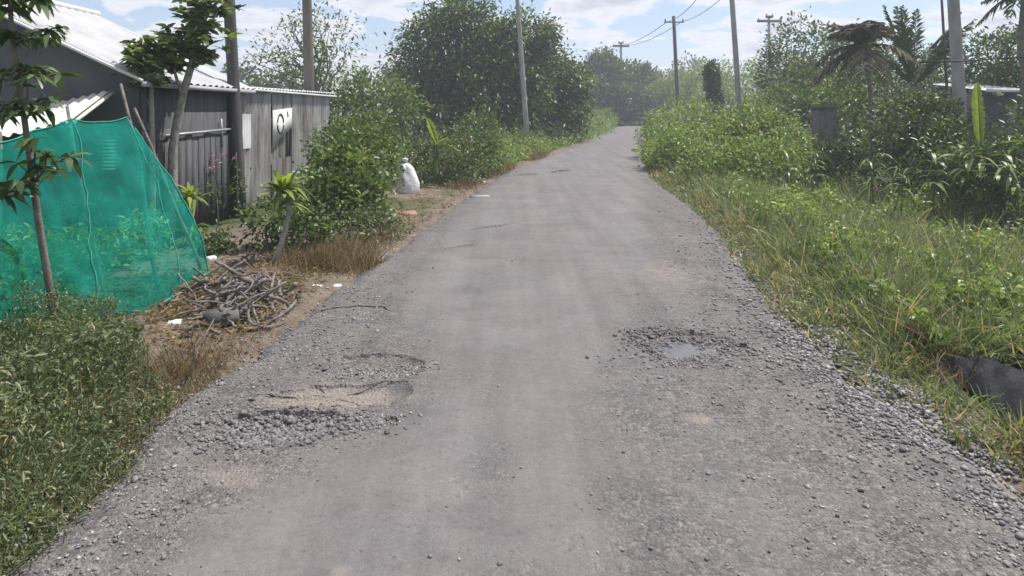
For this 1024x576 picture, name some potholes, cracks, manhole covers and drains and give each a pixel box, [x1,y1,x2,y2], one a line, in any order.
crack [314,305,390,314]
pothole [641,331,749,359]
pothole [245,380,415,408]
crack [445,224,509,249]
pothole [309,353,427,381]
pothole [207,408,353,445]
